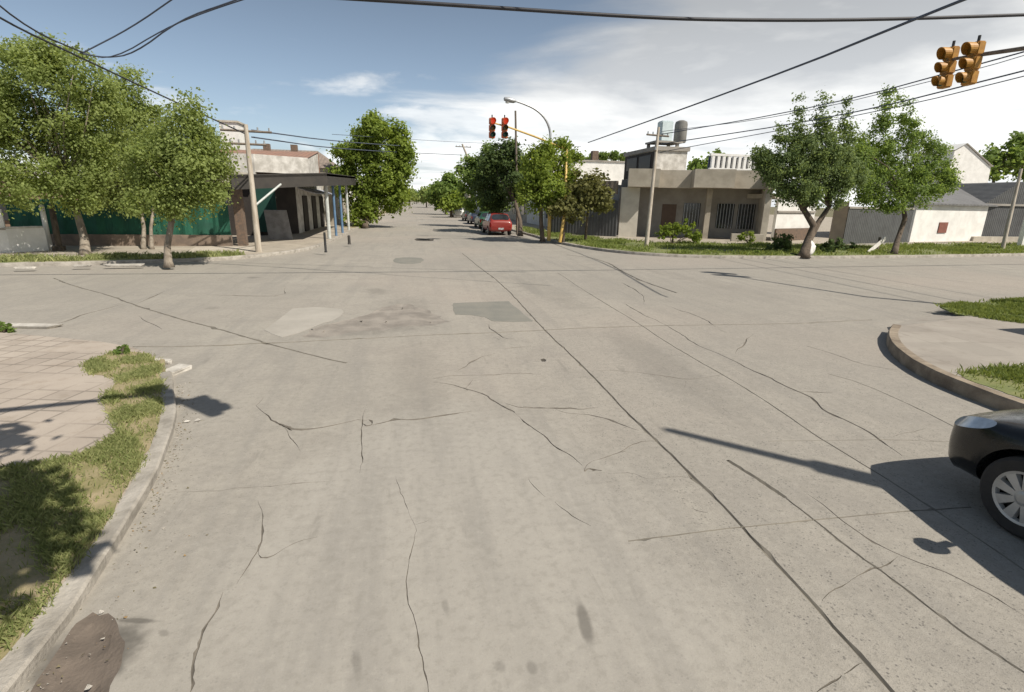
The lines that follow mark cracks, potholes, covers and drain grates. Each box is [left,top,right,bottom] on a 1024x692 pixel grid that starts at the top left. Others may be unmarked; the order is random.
crack [166,480,335,692]
crack [396,480,429,692]
pothole [31,612,125,692]
crack [604,283,927,456]
crack [258,353,692,479]
